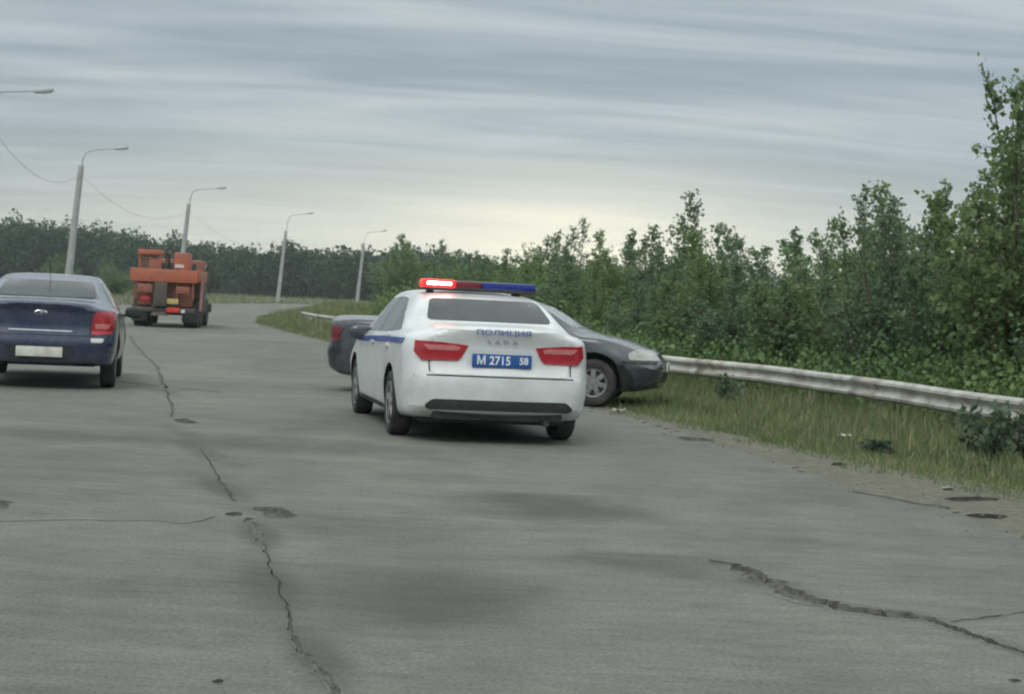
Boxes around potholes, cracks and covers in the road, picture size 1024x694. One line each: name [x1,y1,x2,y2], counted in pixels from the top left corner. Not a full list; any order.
crack [707,559,1024,655]
crack [0,516,217,524]
crack [845,490,950,509]
crack [117,381,217,392]
pothole [252,507,299,518]
